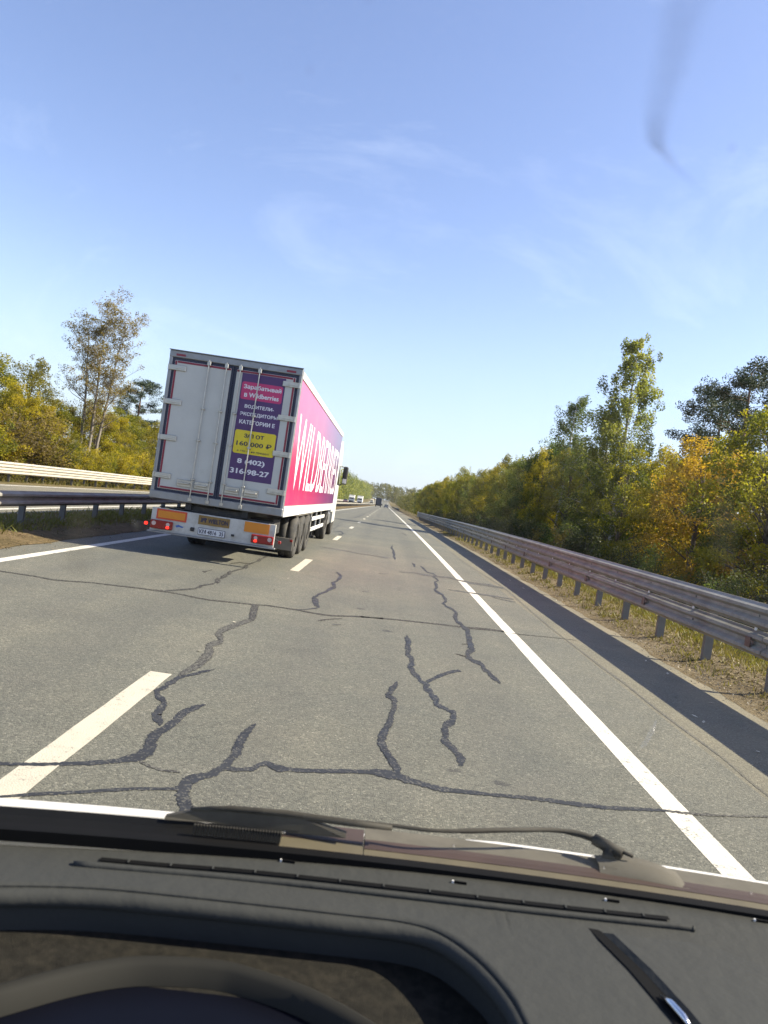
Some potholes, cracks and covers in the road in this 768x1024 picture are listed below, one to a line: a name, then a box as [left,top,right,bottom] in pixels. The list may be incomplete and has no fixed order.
crack [0,556,571,725]
